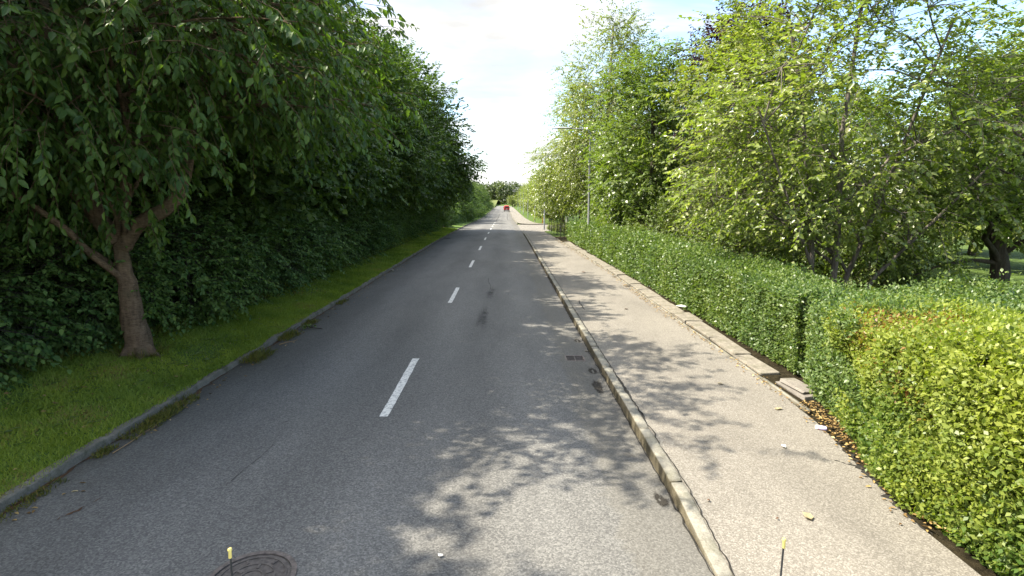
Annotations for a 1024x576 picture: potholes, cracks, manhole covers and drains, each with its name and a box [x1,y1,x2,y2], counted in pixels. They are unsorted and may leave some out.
manhole cover [209,550,297,576]
